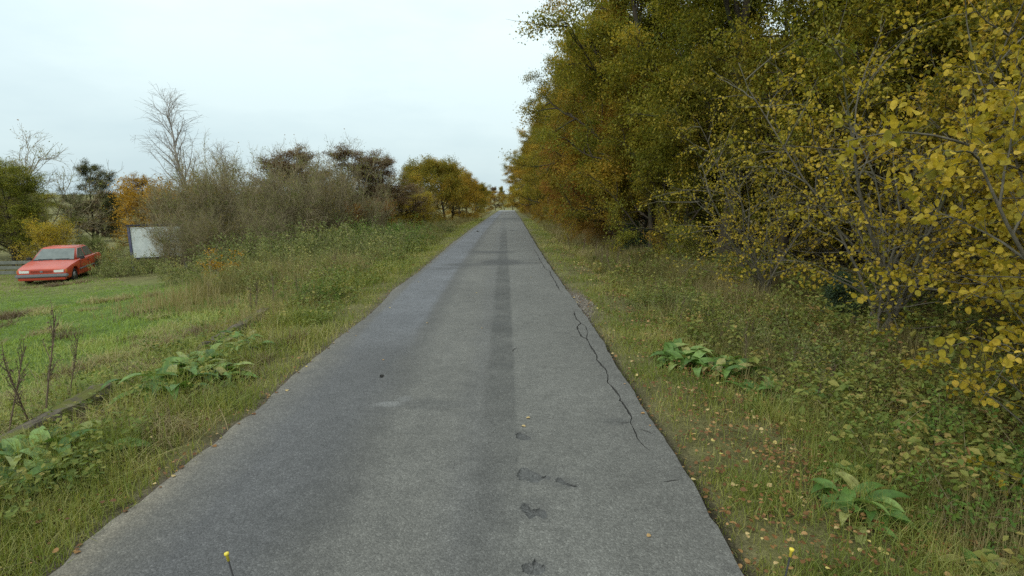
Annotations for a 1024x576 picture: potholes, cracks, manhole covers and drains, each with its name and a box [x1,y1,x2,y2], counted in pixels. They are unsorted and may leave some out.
crack [570,313,652,450]
pothole [520,503,548,519]
pothole [521,558,546,575]
pothole [516,467,552,483]
